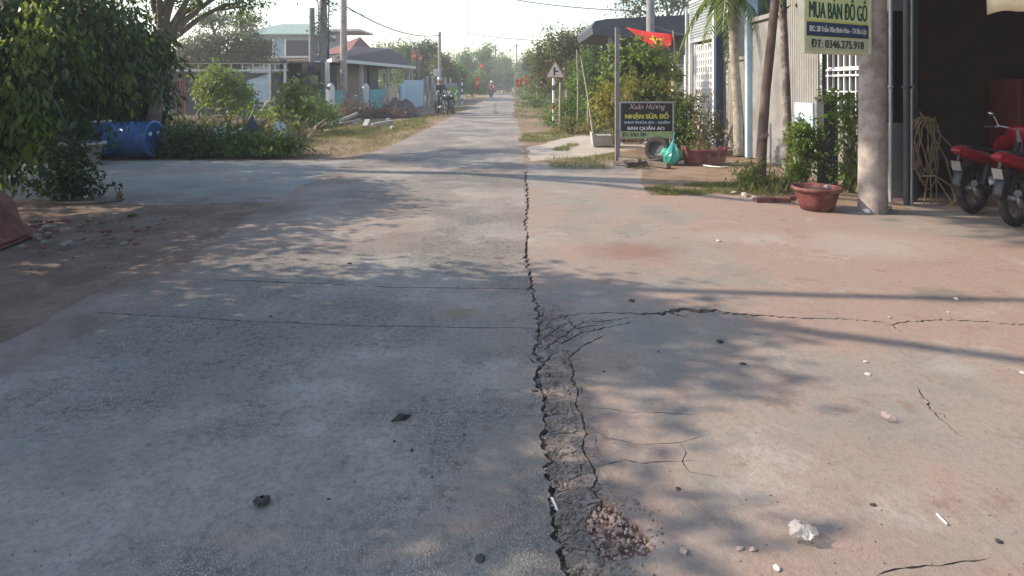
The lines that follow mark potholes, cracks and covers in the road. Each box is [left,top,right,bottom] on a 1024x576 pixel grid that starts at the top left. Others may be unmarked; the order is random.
crack [96,171,1022,576]
pothole [584,501,655,562]
